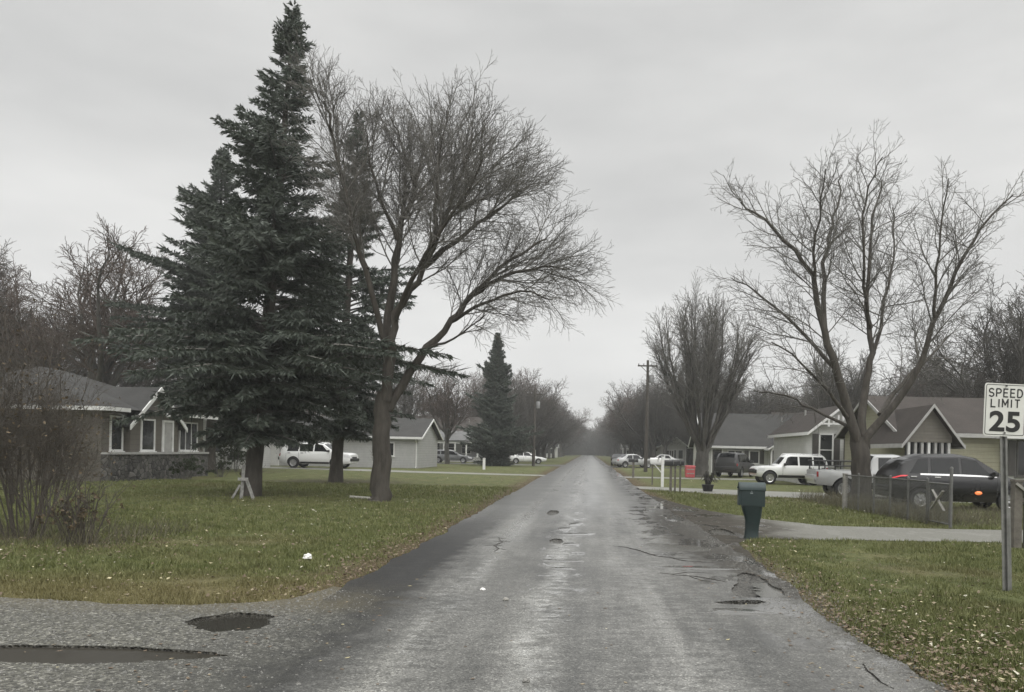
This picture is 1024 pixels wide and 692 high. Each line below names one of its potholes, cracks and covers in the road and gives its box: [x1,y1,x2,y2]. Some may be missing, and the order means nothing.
crack [862,664,894,689]
crack [619,546,725,583]
pothole [0,645,228,664]
pothole [185,612,275,632]
